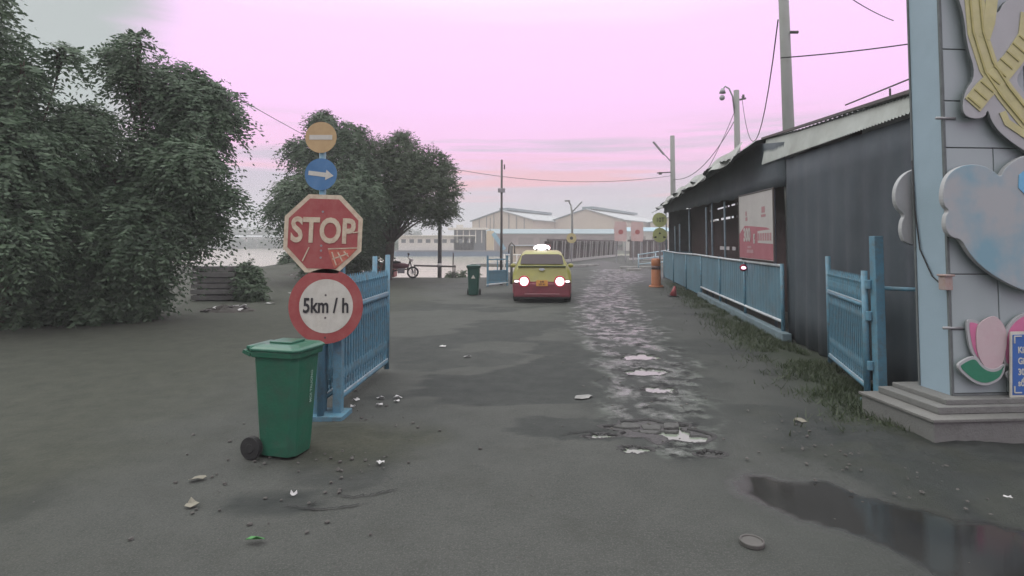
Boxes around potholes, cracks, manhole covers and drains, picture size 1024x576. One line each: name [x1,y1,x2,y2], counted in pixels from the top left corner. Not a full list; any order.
pothole [616,444,656,455]
pothole [618,352,664,360]
pothole [597,418,718,445]
pothole [620,367,673,376]
pothole [637,385,679,394]
